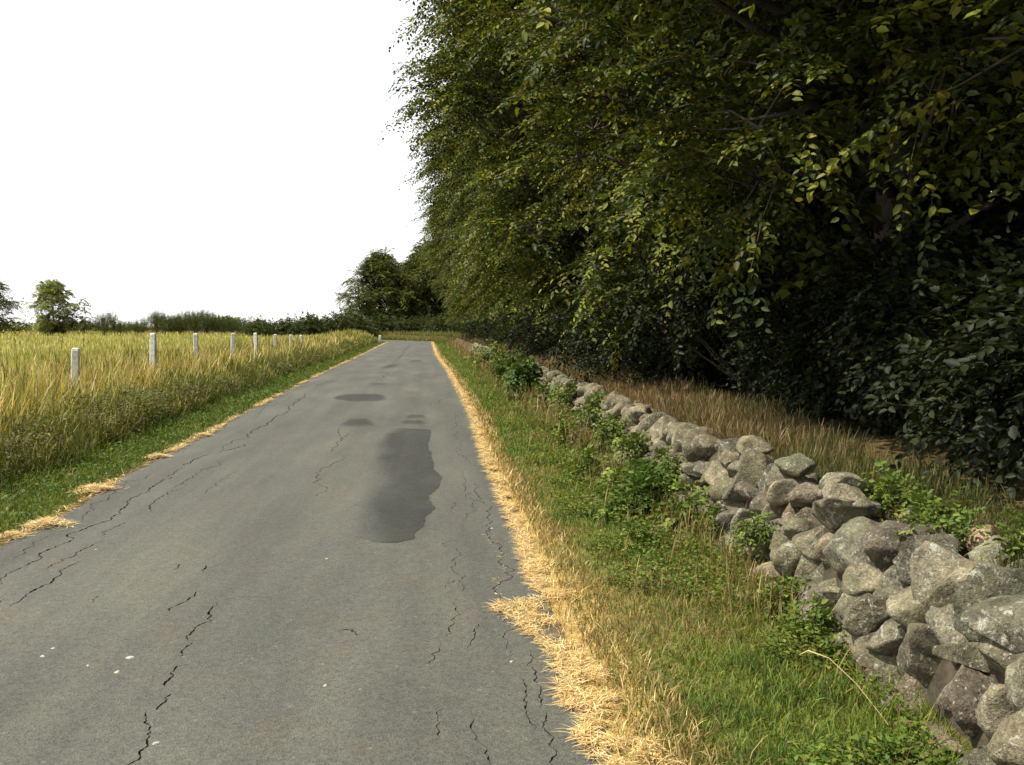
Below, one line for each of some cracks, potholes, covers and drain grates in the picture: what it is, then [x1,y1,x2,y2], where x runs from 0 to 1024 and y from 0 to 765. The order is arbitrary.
crack [451,418,558,765]
crack [0,394,306,606]
crack [128,592,218,765]
crack [313,429,349,498]
crack [429,604,480,663]
